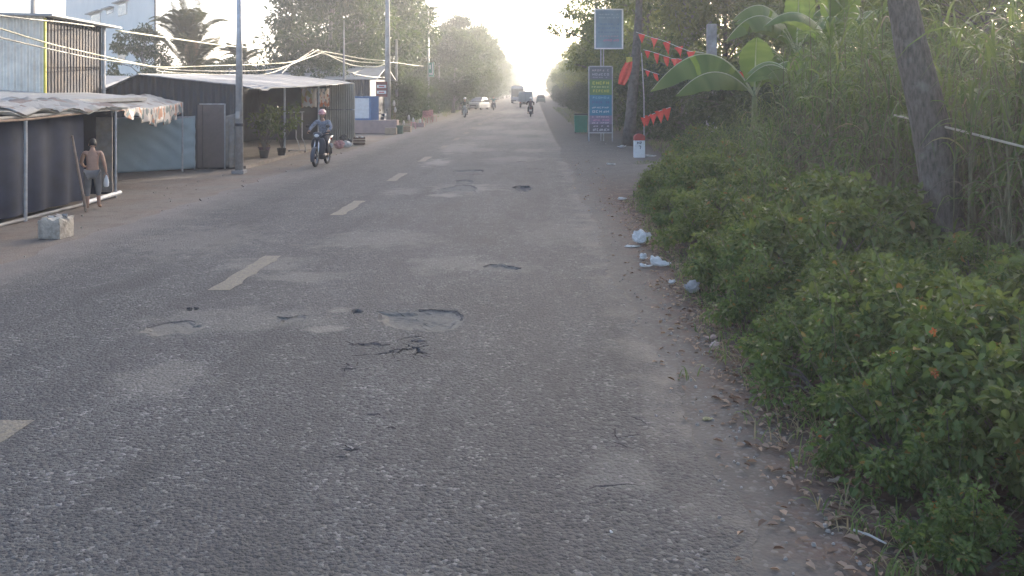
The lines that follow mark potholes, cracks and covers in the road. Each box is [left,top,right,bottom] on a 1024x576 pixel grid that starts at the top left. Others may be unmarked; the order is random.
crack [614,417,646,448]
pothole [268,315,309,323]
pothole [376,309,464,332]
pothole [482,263,521,271]
pothole [138,320,207,336]
crack [339,336,432,375]
